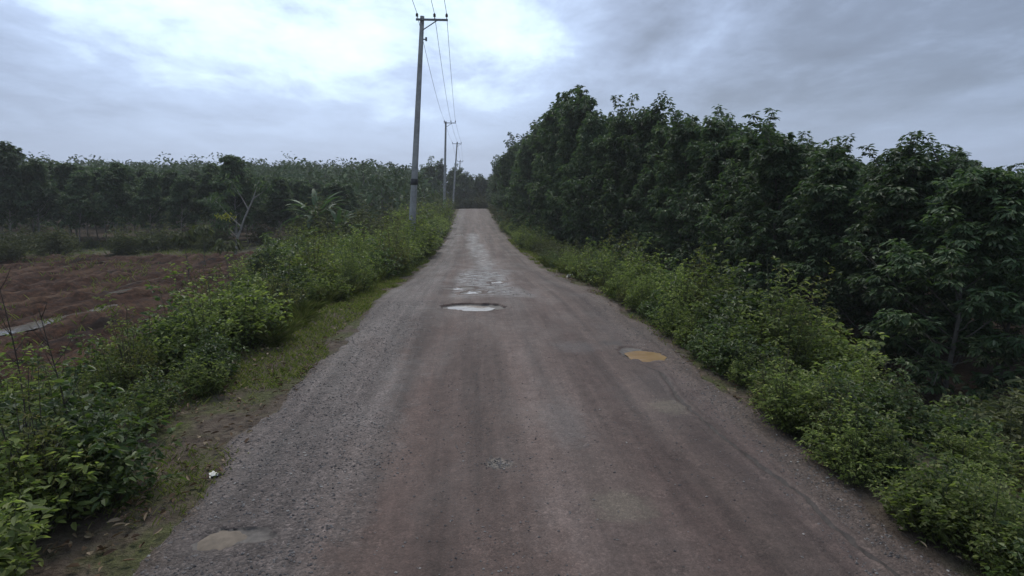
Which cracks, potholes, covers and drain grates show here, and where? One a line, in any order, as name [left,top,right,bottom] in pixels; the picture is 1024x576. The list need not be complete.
pothole [434,302,513,312]
pothole [609,344,679,364]
pothole [165,515,300,563]
